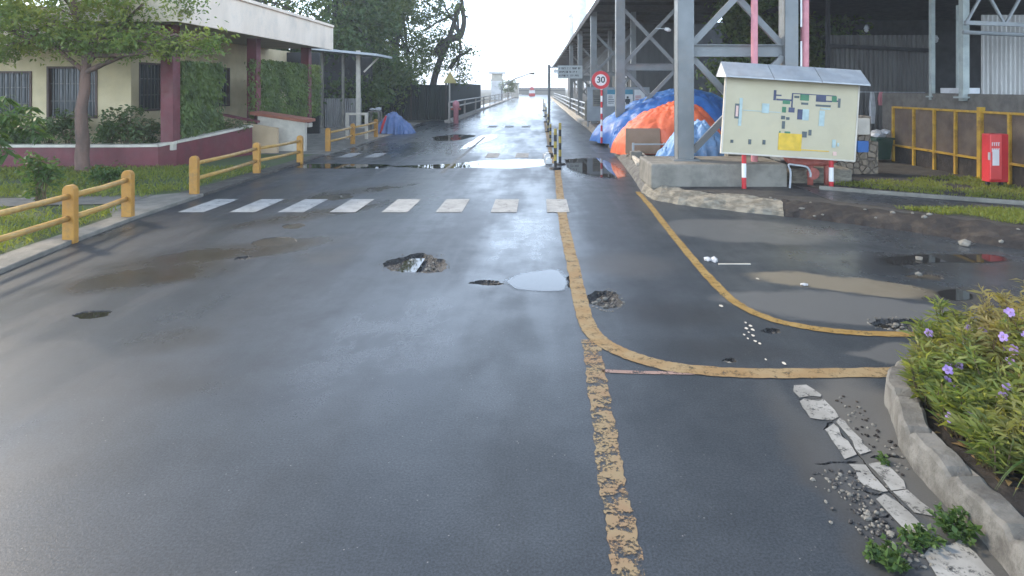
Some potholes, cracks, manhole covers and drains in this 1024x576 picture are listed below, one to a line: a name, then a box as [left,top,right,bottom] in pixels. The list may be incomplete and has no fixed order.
pothole [587,288,625,312]
pothole [867,317,922,332]
pothole [72,310,112,319]
pothole [379,252,450,275]
crack [818,422,908,522]
